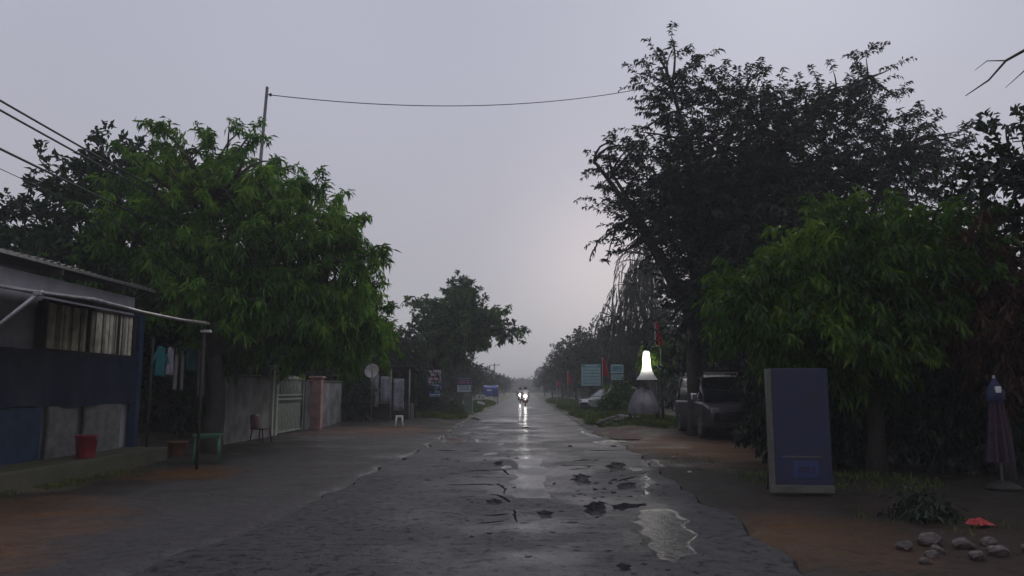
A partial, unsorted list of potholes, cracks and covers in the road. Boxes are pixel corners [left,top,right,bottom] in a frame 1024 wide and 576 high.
pothole [570,473,593,488]
pothole [611,502,646,511]
pothole [535,510,554,519]
pothole [606,462,628,472]
pothole [616,482,638,490]
crack [433,450,517,524]
pothole [583,500,610,518]
